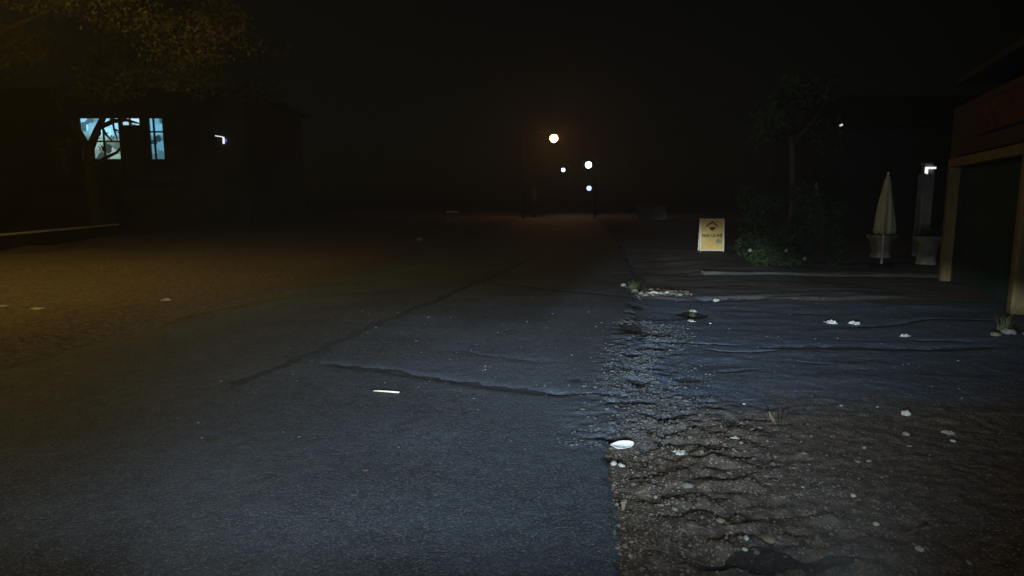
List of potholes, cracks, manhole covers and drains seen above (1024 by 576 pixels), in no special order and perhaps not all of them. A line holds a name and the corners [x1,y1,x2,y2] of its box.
crack [644,341,780,353]
pothole [699,548,871,576]
